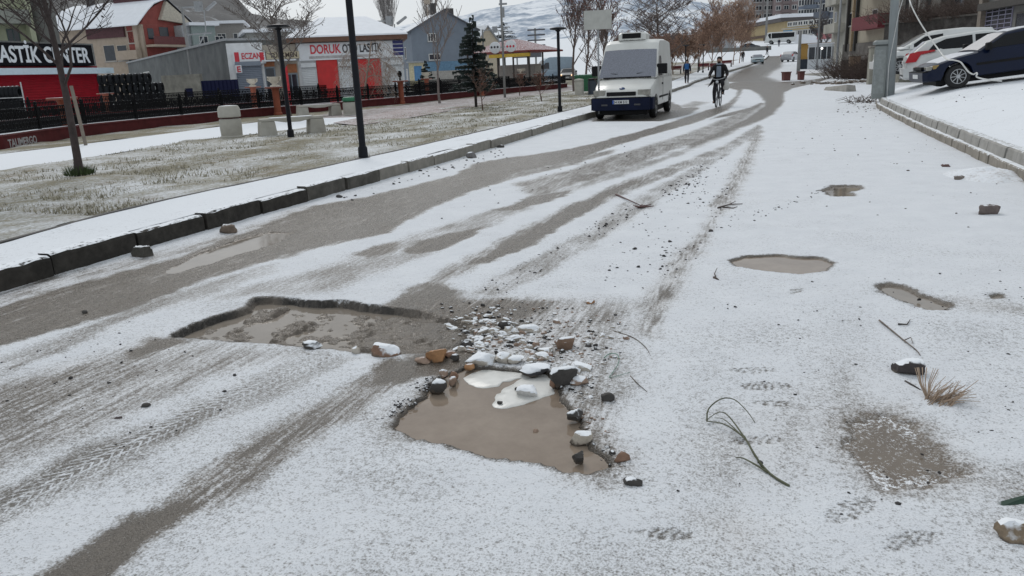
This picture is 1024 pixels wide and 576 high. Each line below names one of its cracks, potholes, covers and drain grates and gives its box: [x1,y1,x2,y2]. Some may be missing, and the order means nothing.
pothole [721,253,842,276]
pothole [149,230,301,277]
pothole [374,361,629,481]
pothole [161,294,482,358]
pothole [815,184,872,197]
pothole [825,404,990,500]
pothole [866,279,966,313]
pothole [979,290,1016,303]
